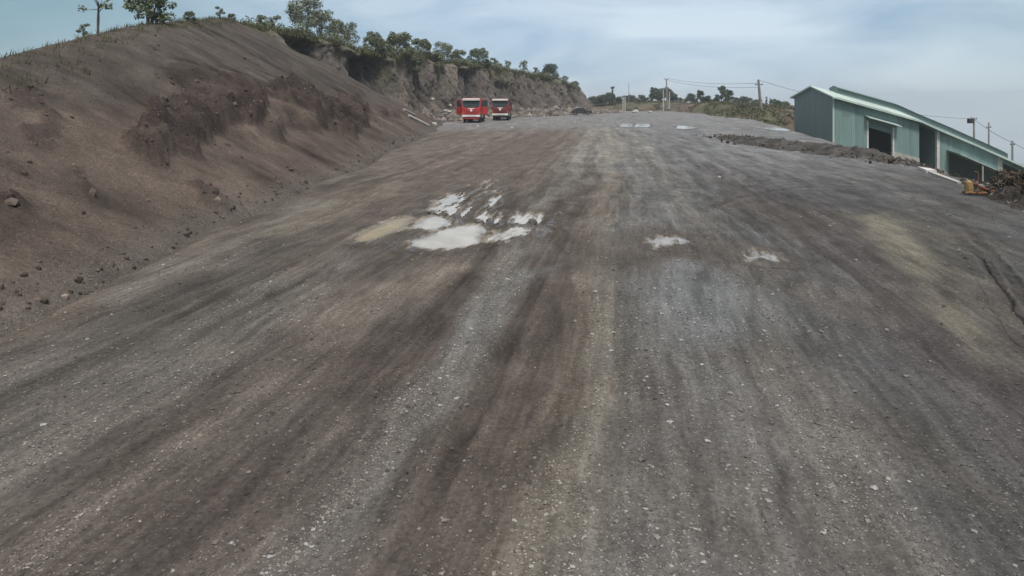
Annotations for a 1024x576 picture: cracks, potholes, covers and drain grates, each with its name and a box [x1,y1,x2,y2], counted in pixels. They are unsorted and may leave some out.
crack [958,248,1024,348]
pothole [482,222,560,247]
pothole [409,191,469,215]
pothole [328,212,422,248]
pothole [719,245,818,270]
pothole [428,178,572,225]
pothole [386,220,499,255]
pothole [626,231,710,252]
